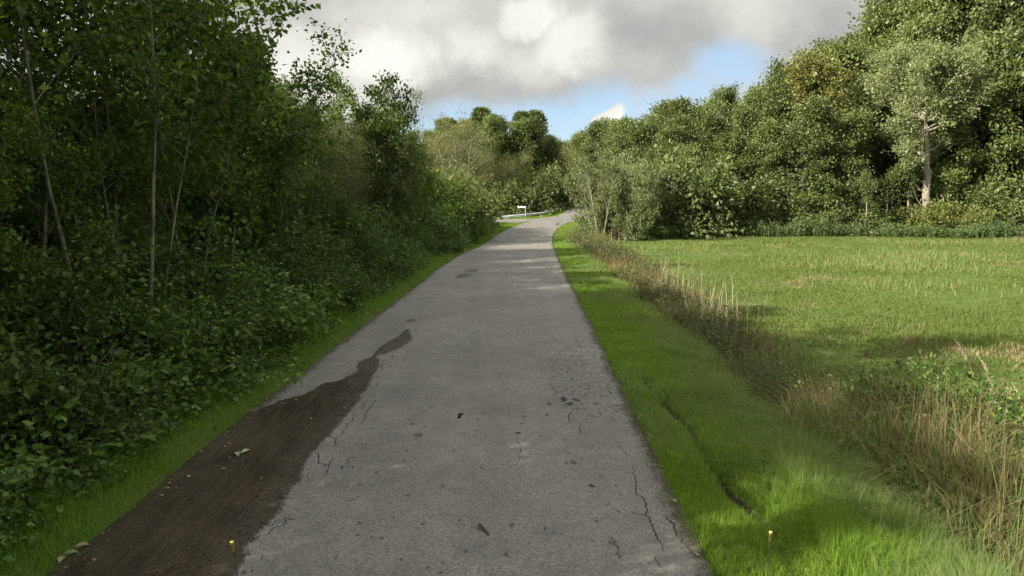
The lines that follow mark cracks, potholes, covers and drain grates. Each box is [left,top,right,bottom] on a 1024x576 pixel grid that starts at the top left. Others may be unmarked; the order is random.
crack [551,337,700,571]
crack [289,346,413,496]
crack [239,517,297,568]
